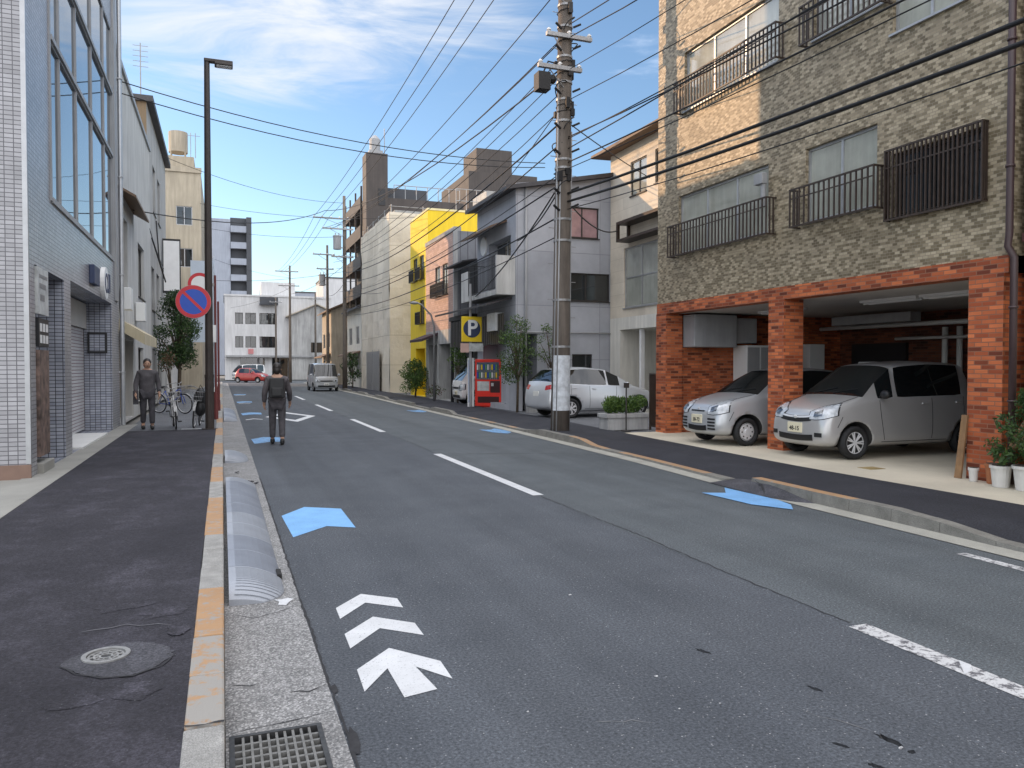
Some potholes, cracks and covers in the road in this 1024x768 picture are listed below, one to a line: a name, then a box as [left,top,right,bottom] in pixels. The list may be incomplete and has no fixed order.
drain grate [229,722,334,768]
manhole cover [81,646,131,664]
crack [58,655,173,678]
